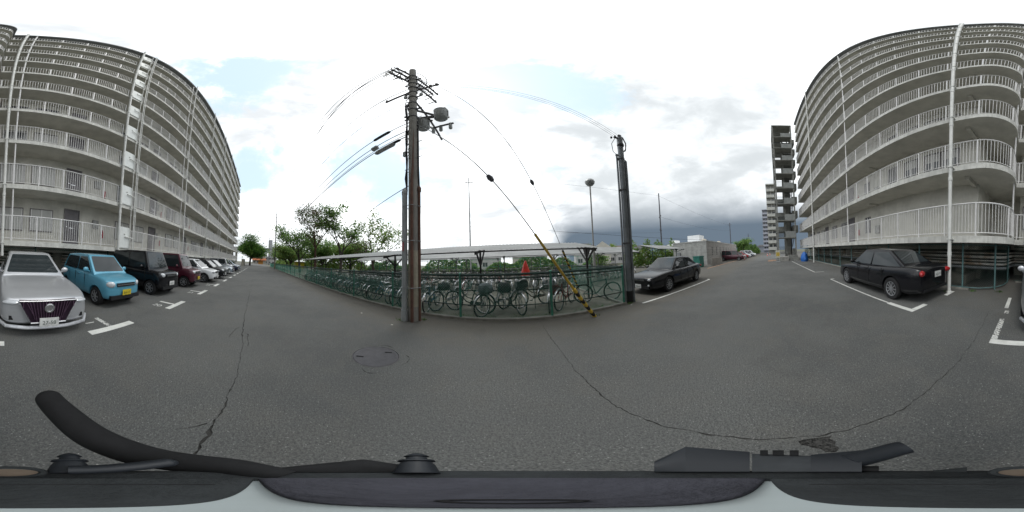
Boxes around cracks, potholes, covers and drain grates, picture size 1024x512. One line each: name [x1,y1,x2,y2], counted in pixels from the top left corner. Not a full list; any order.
crack [543,310,990,452]
manhole cover [352,346,400,368]
crack [176,288,251,454]
